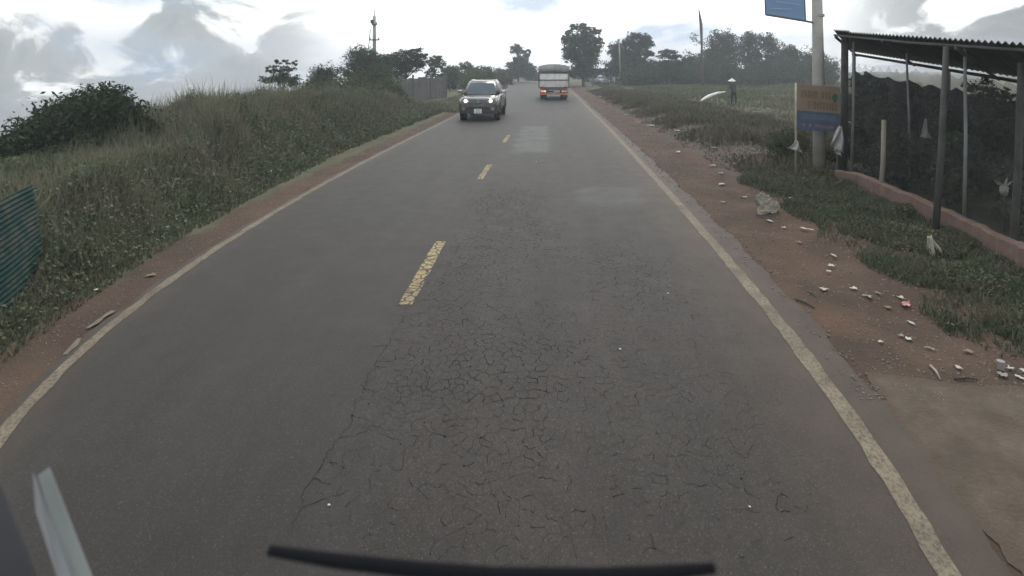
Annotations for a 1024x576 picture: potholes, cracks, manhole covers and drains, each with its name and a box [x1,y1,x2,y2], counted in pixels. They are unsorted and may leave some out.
crack [291,182,596,567]
crack [573,240,836,576]
